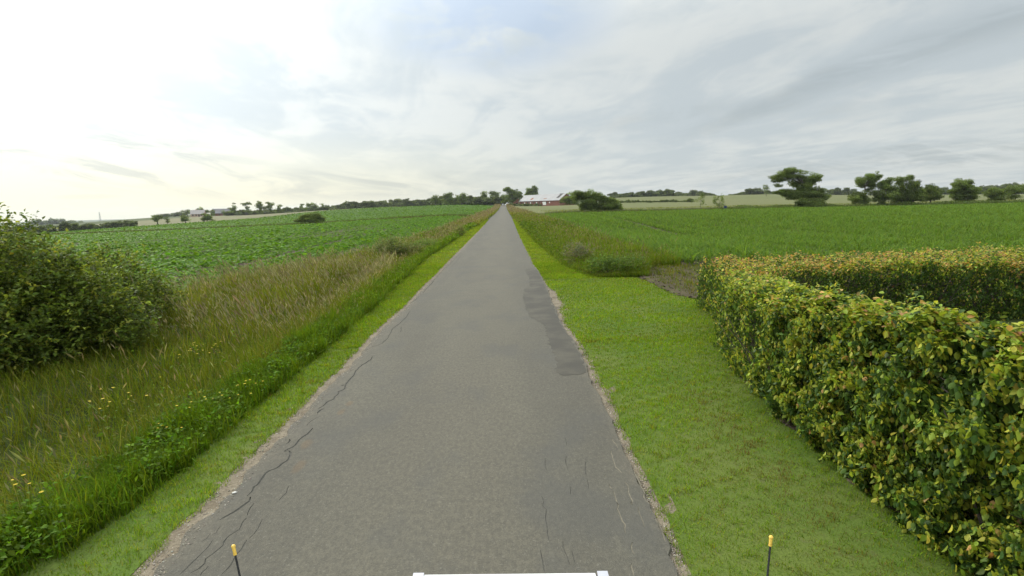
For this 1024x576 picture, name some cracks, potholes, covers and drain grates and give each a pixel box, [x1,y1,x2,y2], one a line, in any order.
crack [540,460,575,572]
crack [565,439,665,575]
crack [179,252,462,575]
